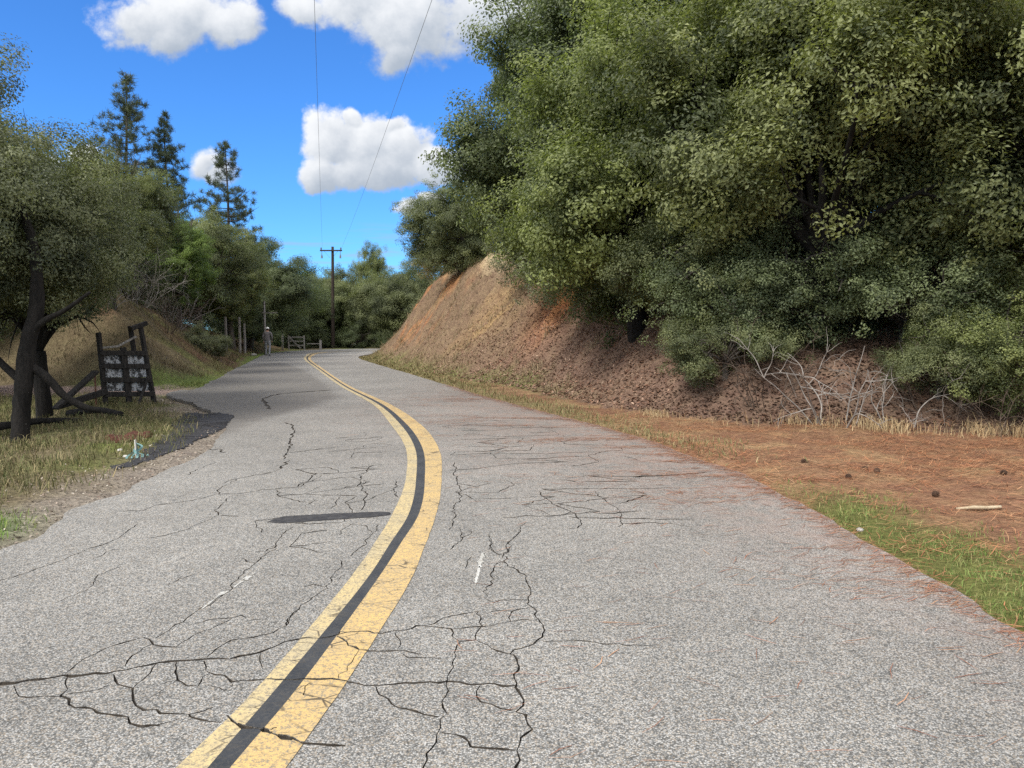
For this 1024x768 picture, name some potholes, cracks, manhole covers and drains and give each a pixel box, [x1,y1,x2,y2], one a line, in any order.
crack [0,390,649,768]
crack [443,420,706,529]
